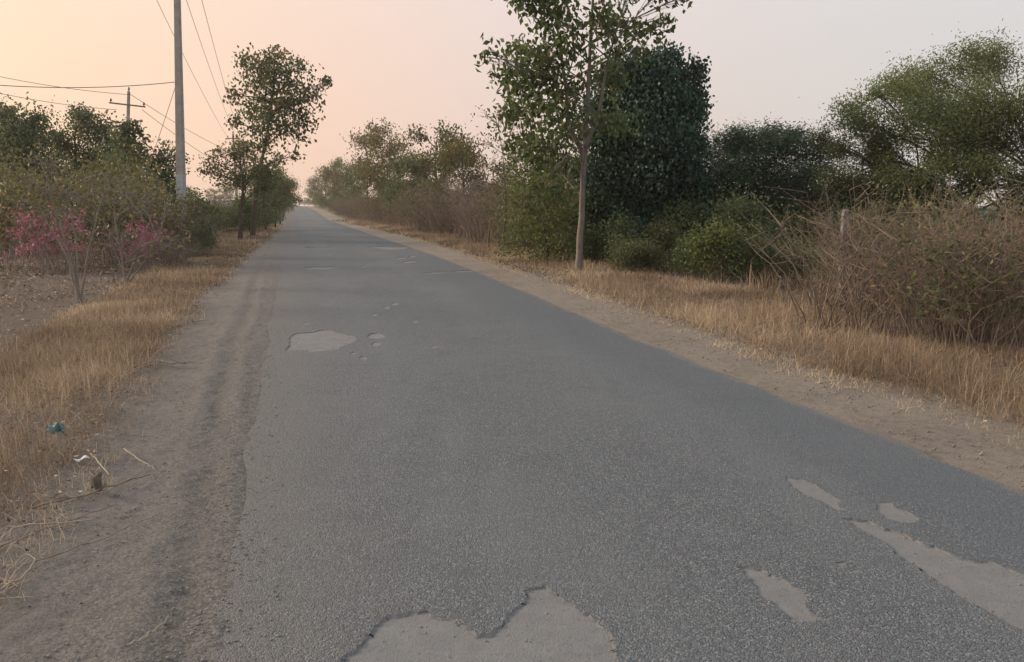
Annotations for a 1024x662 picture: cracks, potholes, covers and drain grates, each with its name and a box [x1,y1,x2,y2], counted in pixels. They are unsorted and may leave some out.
pothole [285,330,356,352]
pothole [785,477,853,512]
pothole [737,565,830,623]
pothole [339,585,619,662]
pothole [842,518,1024,631]
pothole [874,501,920,523]
